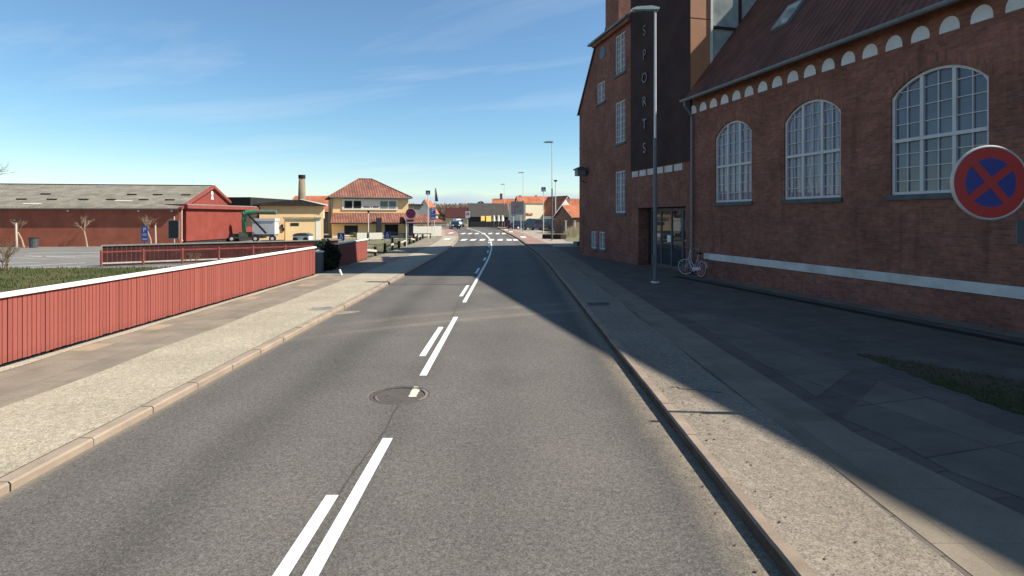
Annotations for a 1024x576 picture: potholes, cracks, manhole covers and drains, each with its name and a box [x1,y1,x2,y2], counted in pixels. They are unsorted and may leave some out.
manhole cover [369,386,429,405]
